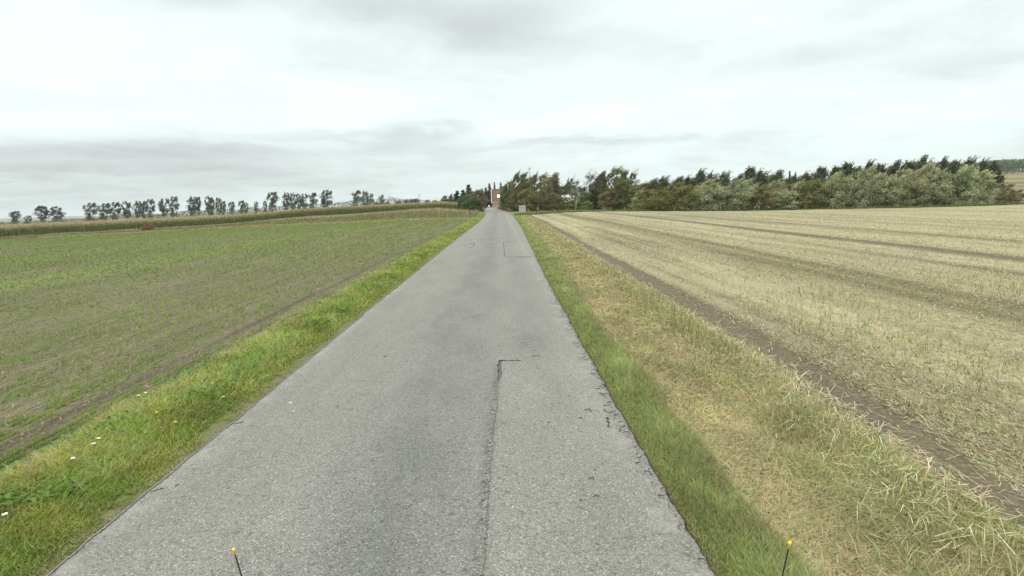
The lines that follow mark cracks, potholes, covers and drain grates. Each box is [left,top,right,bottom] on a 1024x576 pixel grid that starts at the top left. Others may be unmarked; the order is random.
crack [536,258,715,576]
